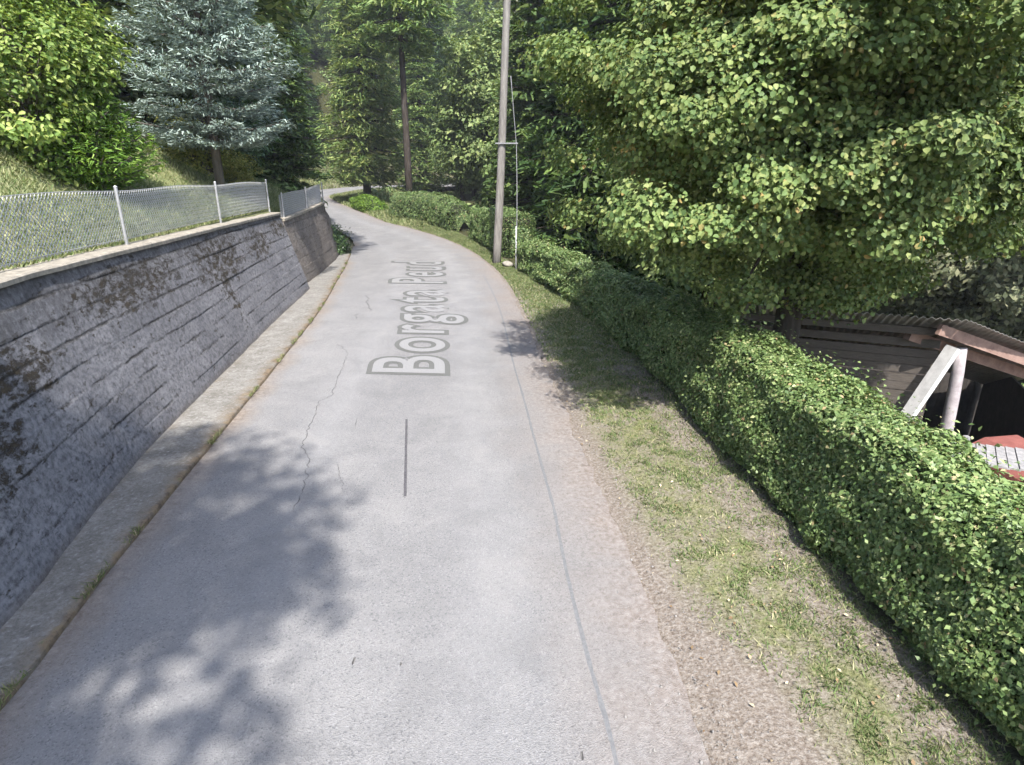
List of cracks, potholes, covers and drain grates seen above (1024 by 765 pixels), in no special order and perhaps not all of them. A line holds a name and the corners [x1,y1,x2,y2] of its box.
crack [293,344,348,512]
